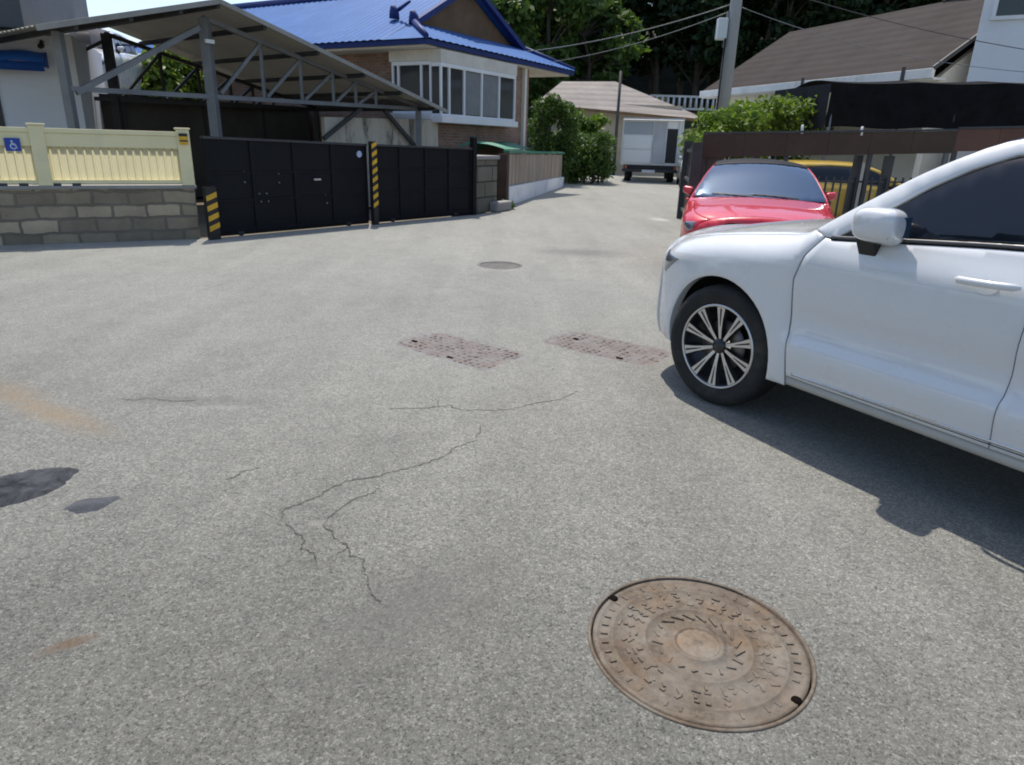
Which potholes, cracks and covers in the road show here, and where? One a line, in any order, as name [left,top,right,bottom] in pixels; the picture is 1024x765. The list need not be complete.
manhole cover [478,261,522,269]
crack [389,390,578,411]
manhole cover [587,576,817,733]
crack [280,425,481,602]
